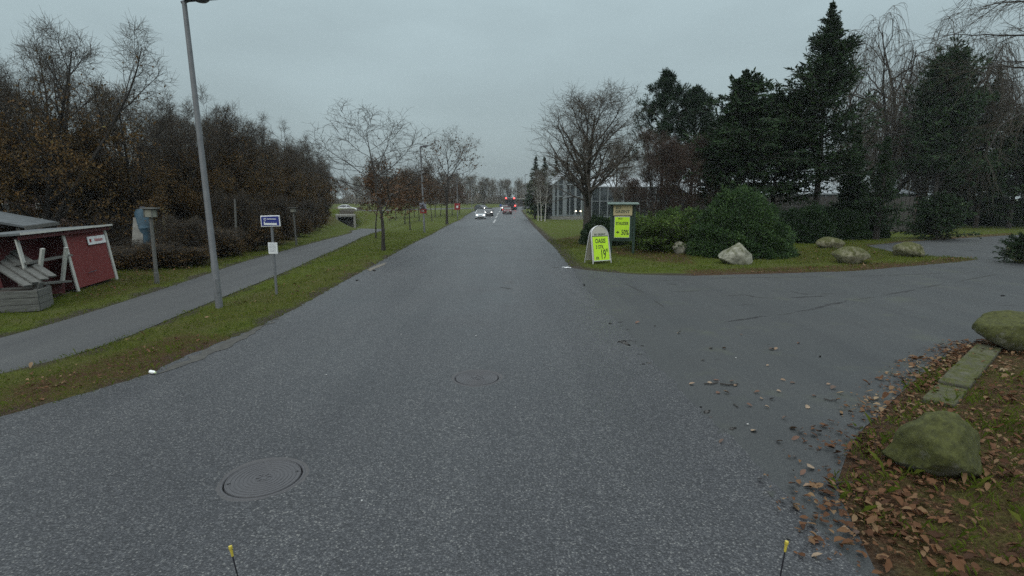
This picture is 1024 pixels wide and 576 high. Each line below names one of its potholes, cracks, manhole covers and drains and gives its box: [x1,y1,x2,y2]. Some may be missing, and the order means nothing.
manhole cover [215,457,310,502]
manhole cover [451,370,503,387]
